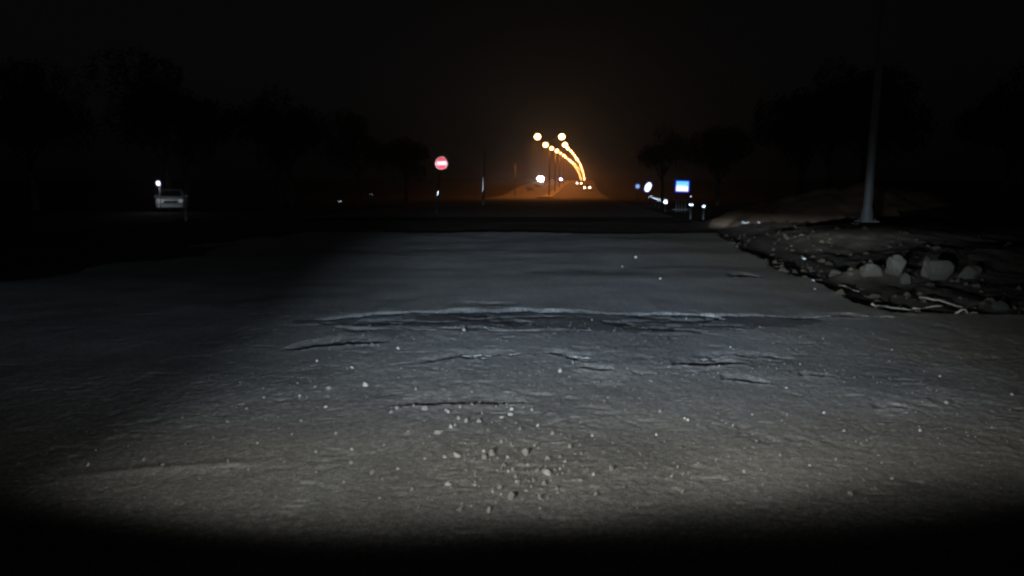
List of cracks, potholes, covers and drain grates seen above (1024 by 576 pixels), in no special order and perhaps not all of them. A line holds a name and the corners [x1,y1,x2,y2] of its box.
crack [431,352,590,370]
